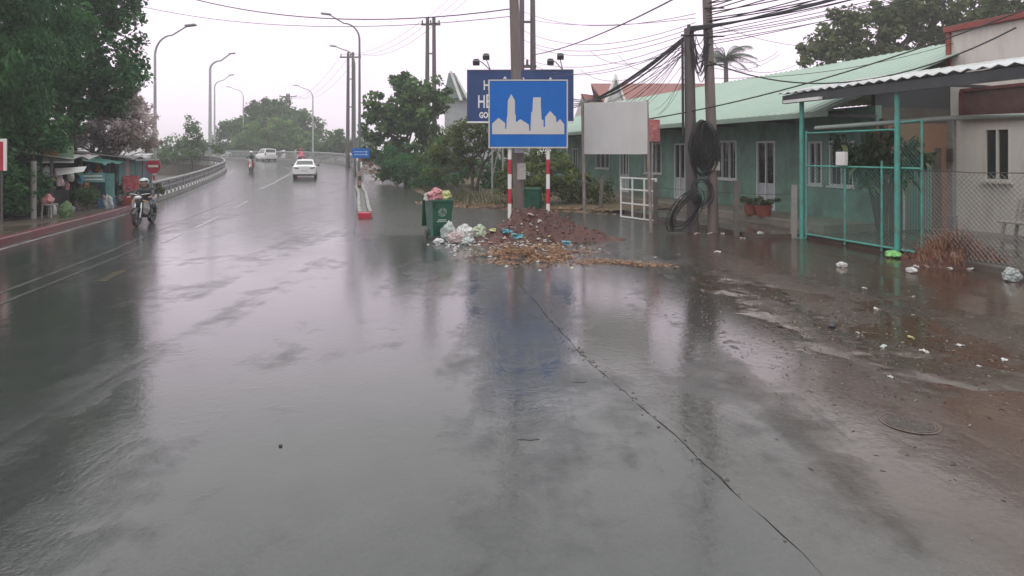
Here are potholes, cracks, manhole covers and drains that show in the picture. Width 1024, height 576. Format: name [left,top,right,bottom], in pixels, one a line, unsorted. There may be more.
manhole cover [878,413,943,435]
